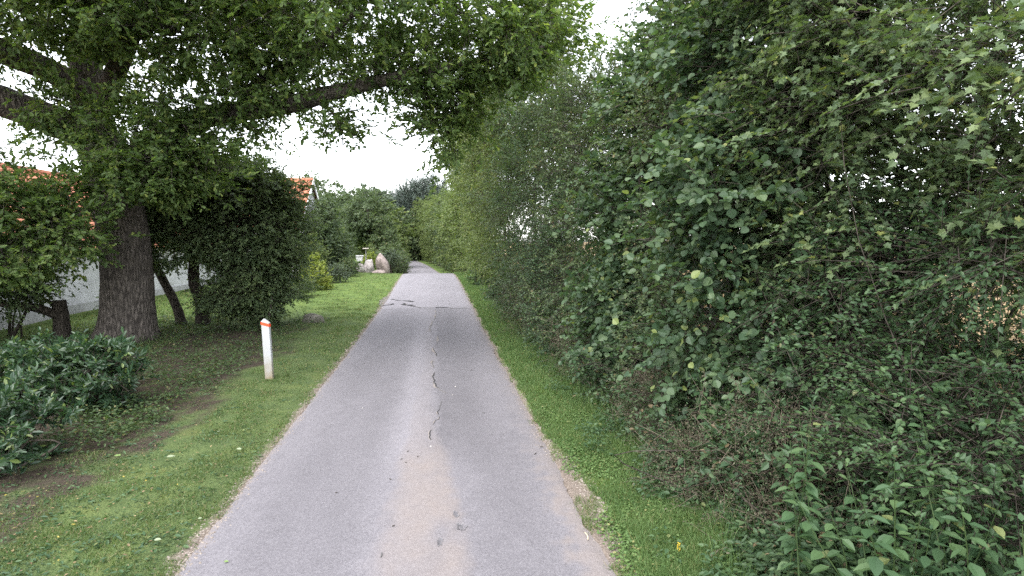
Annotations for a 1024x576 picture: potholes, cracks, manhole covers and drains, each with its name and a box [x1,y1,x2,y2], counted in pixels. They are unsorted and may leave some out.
crack [428,348,447,440]
